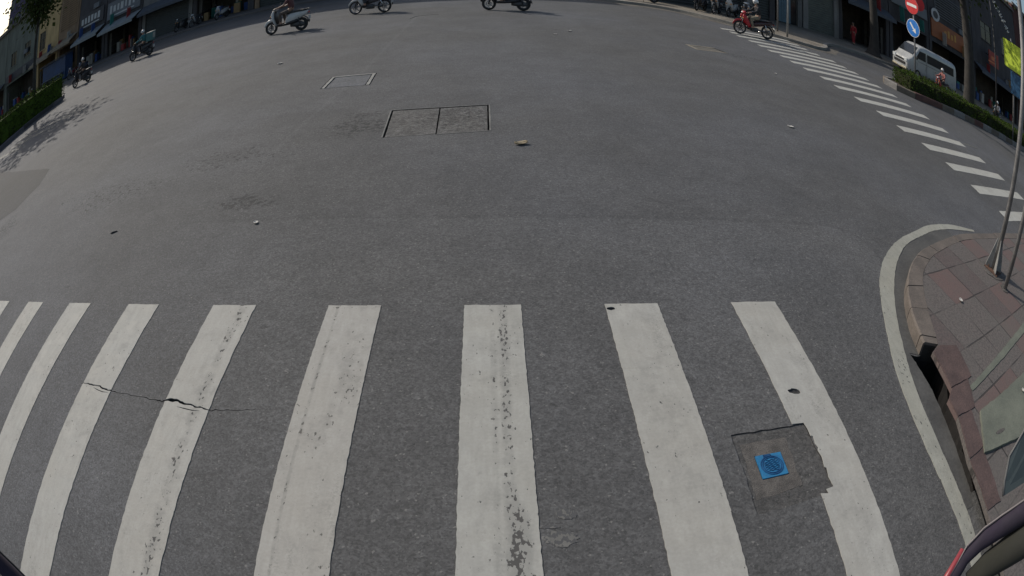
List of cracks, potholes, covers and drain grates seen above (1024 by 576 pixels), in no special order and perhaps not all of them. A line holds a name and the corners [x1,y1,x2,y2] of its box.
crack [84,383,255,411]
drain grate [911,355,976,492]
manhole cover [381,104,491,138]
manhole cover [321,73,377,89]
